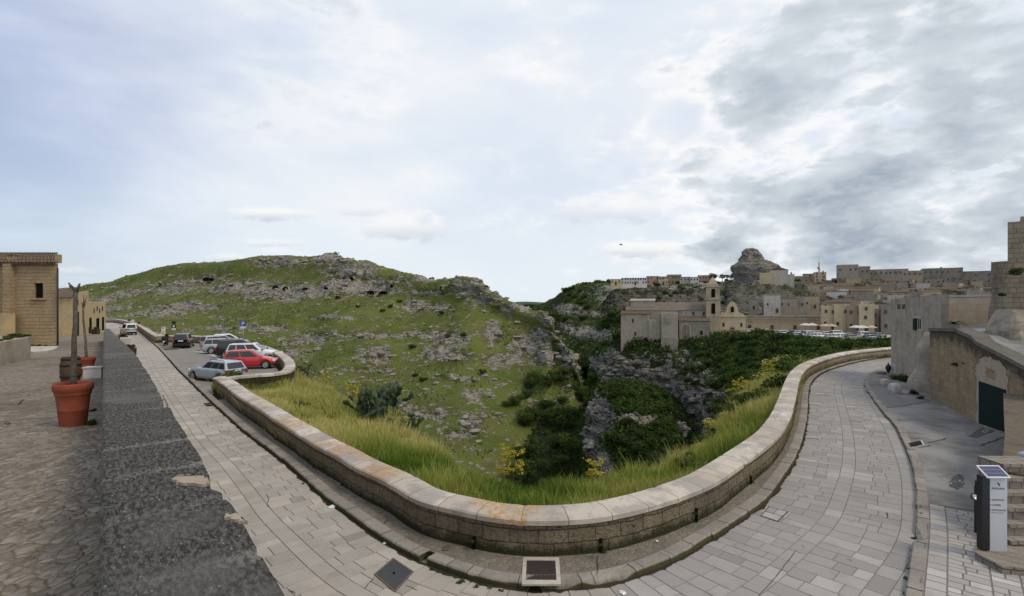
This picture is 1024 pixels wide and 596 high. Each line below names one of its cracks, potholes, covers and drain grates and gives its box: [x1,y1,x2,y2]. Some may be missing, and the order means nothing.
manhole cover [374,558,414,592]
manhole cover [761,506,788,522]
